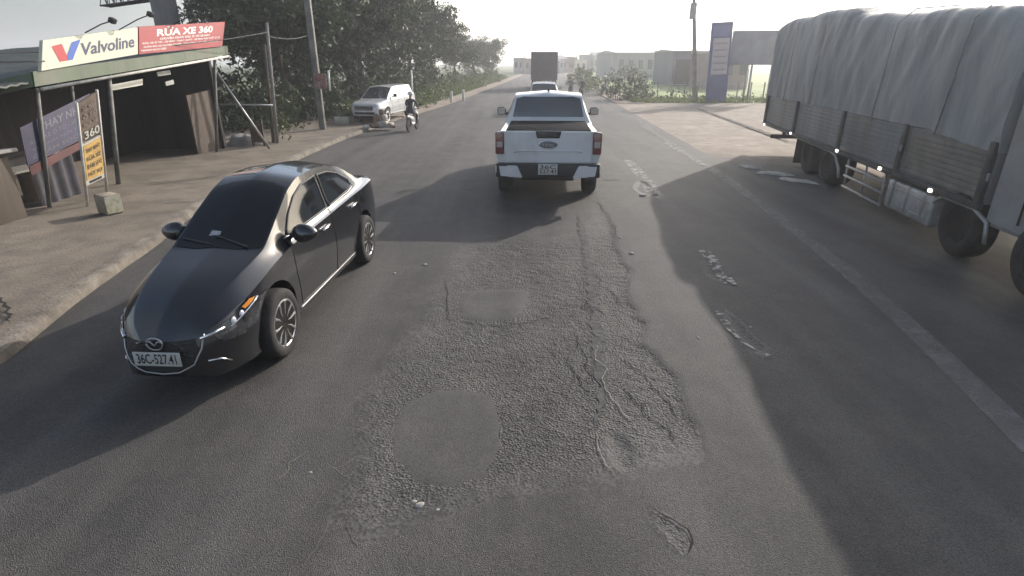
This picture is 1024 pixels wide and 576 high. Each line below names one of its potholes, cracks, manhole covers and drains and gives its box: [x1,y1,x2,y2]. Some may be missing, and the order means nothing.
pothole [724,309,773,360]
pothole [649,508,696,559]
pothole [631,179,656,199]
crack [305,201,704,563]
pothole [700,257,728,286]
